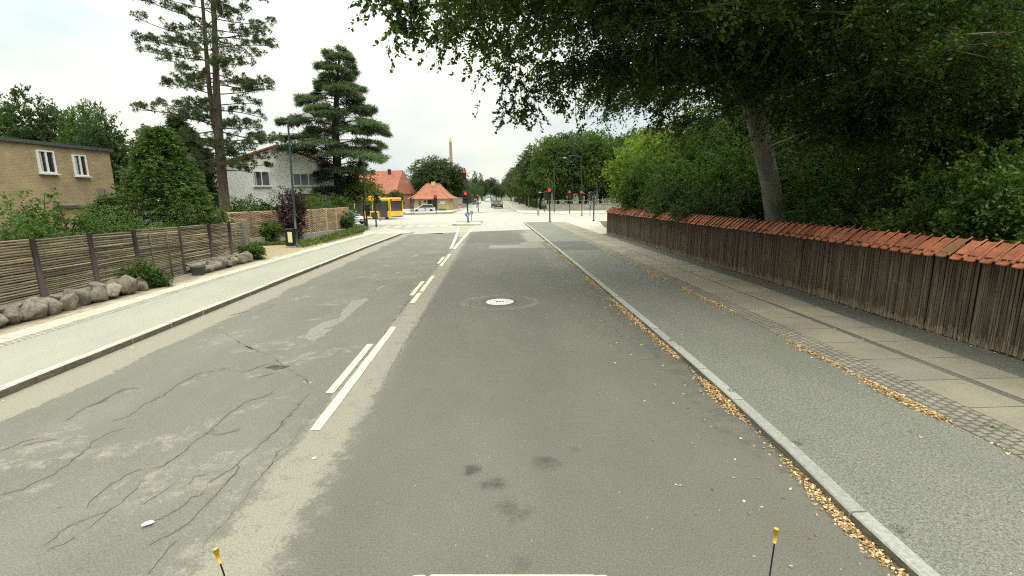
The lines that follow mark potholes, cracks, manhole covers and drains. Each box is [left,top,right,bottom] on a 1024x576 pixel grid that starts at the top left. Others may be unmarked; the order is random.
crack [48,333,312,548]
crack [1,369,223,495]
